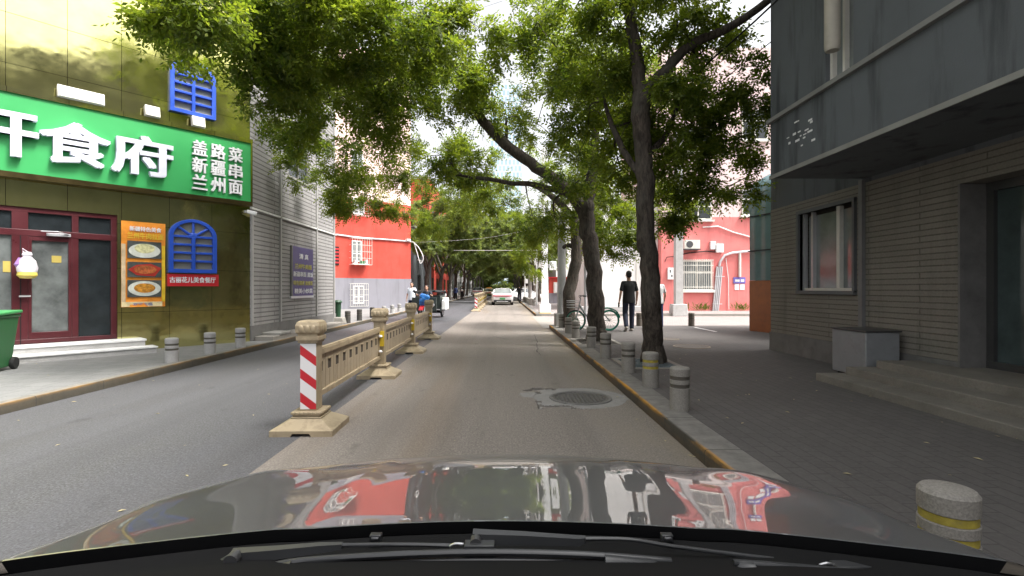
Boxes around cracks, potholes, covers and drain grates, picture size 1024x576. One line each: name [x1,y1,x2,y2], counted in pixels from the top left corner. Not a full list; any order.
manhole cover [519,388,629,409]
